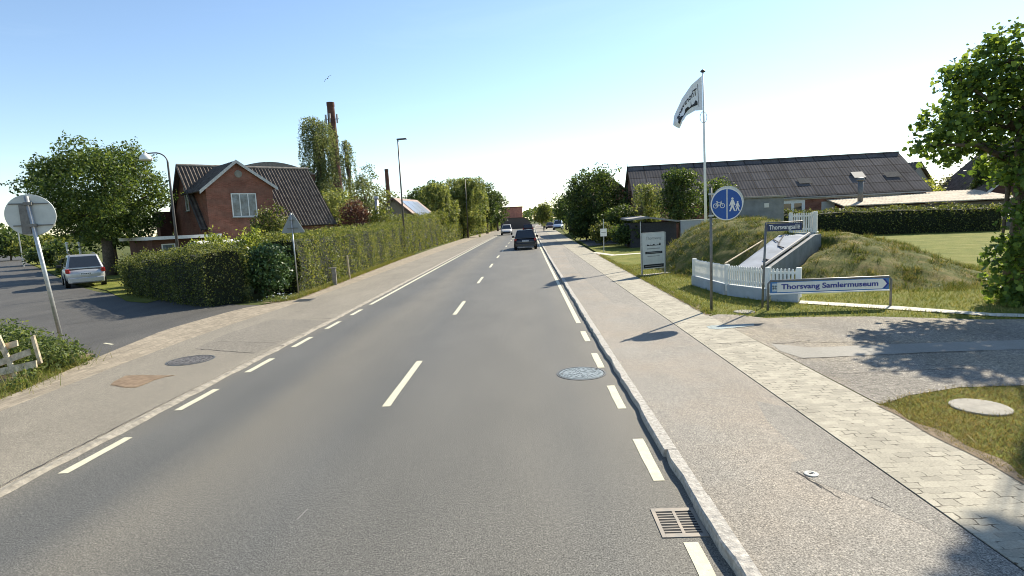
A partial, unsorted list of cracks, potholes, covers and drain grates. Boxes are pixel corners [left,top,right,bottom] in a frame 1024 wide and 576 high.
drain grate [650,507,709,538]
manhole cover [948,398,1014,417]
manhole cover [557,367,606,380]
manhole cover [165,355,215,366]
